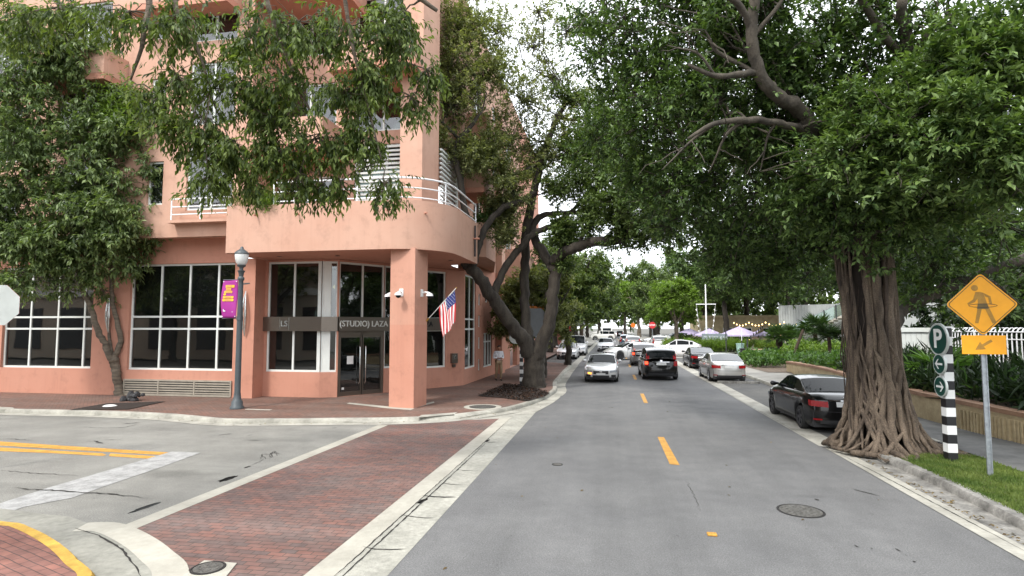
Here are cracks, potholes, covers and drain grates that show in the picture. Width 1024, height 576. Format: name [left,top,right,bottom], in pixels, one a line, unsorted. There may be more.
manhole cover [183,560,237,576]
crack [2,470,138,497]
manhole cover [776,504,826,518]
